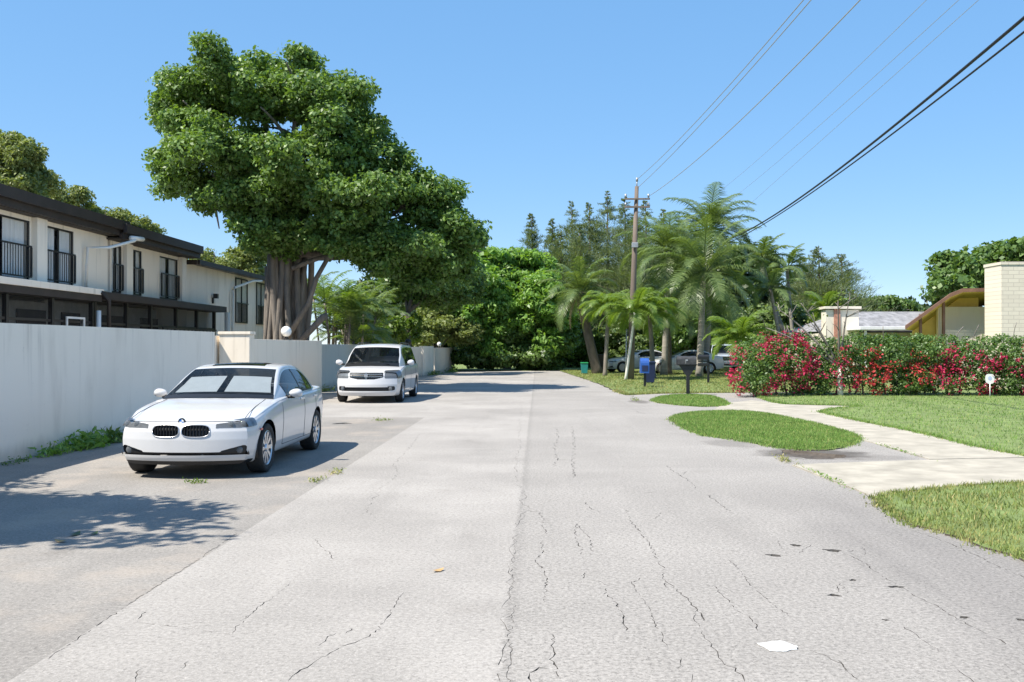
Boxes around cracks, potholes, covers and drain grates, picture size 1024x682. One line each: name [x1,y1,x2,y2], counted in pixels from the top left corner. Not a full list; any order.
crack [528,635,559,681]
crack [715,549,786,629]
crack [574,502,693,682]
crack [288,594,402,681]
crack [631,521,745,681]
